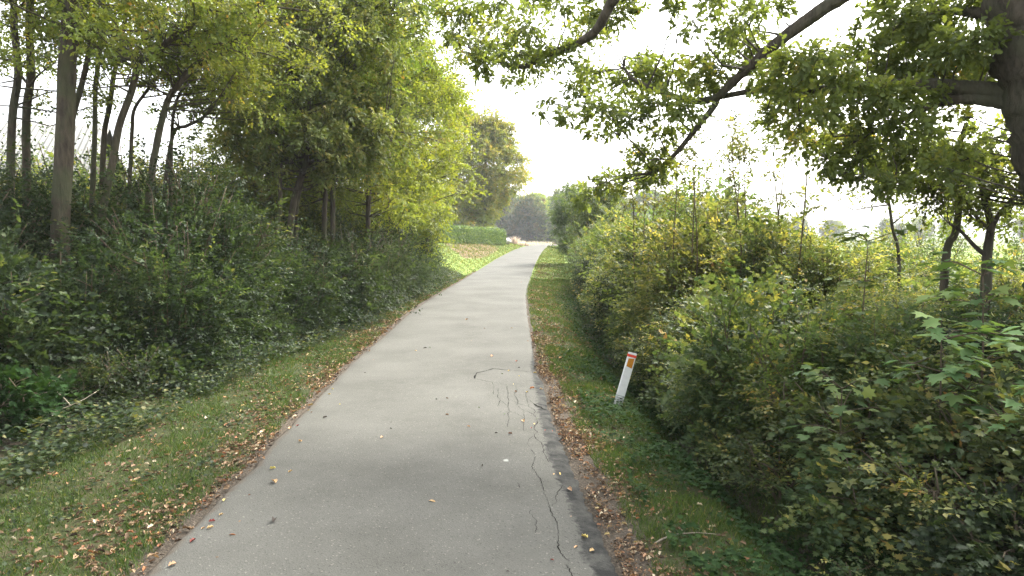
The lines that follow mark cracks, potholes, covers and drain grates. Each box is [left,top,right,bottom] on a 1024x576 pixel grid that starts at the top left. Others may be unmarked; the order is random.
crack [474,368,549,462]
crack [529,457,574,576]
